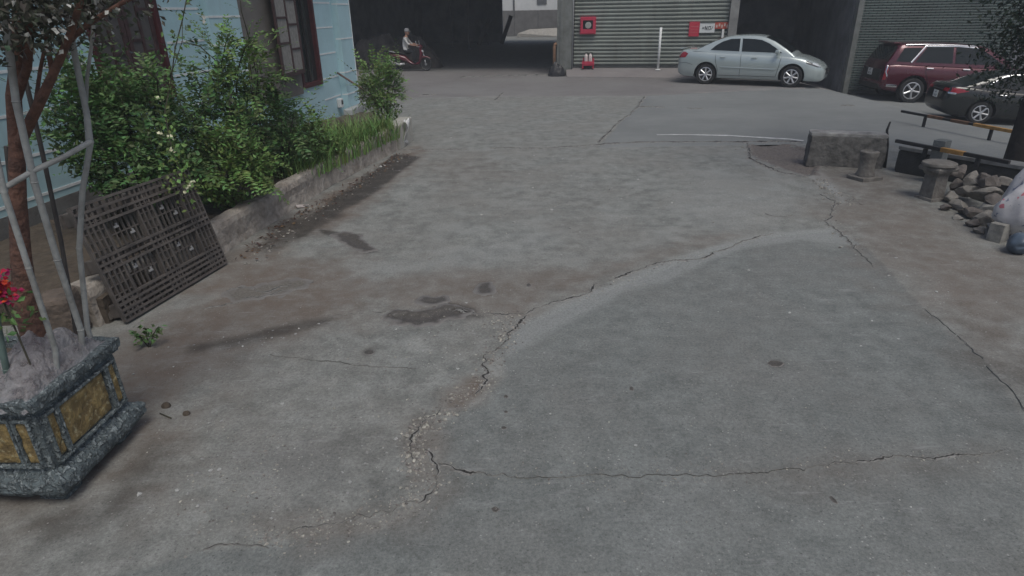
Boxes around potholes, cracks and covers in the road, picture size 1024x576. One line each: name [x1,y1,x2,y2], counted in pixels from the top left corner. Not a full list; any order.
crack [288,409,1003,534]
crack [926,310,1024,411]
crack [202,543,269,551]
crack [456,213,794,395]
crack [820,194,872,265]
crack [270,354,416,369]
